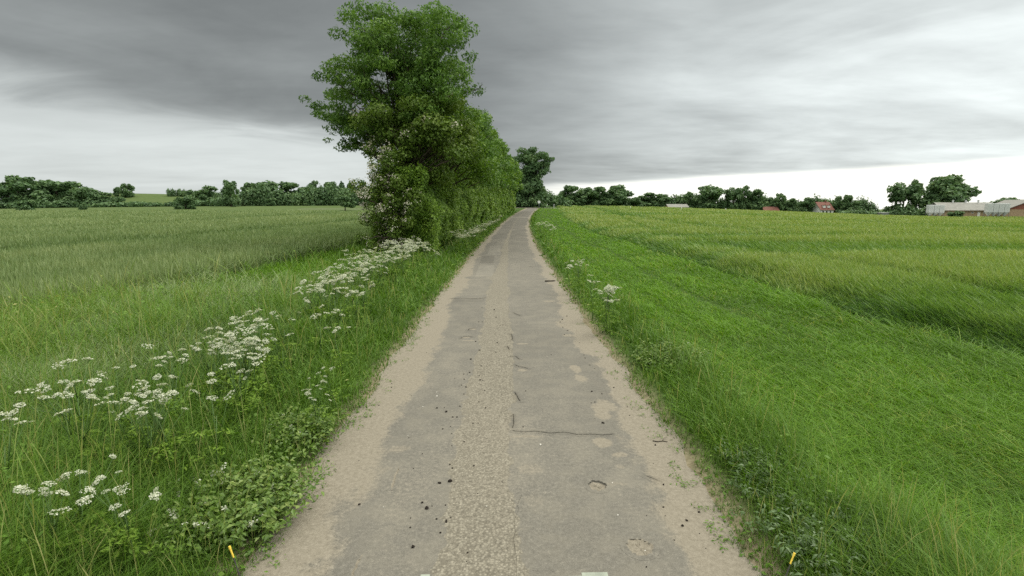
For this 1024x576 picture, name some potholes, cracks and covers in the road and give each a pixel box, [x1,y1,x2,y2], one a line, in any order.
pothole [620,534,660,560]
crack [507,391,617,437]
pothole [583,478,611,493]
crack [506,491,528,576]
